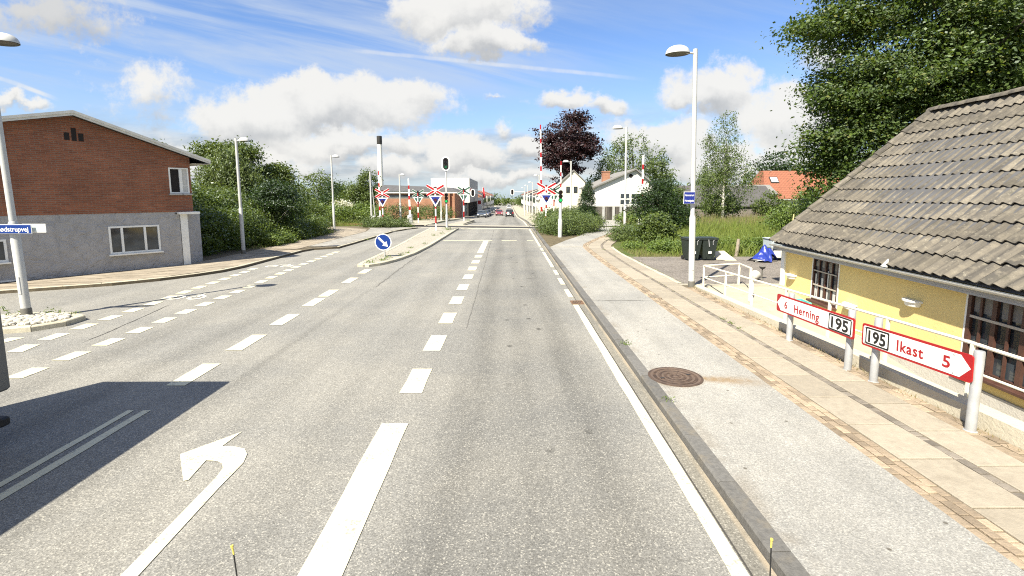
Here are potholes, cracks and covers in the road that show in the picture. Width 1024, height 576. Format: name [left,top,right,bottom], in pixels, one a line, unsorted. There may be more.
manhole cover [648,367,704,387]
